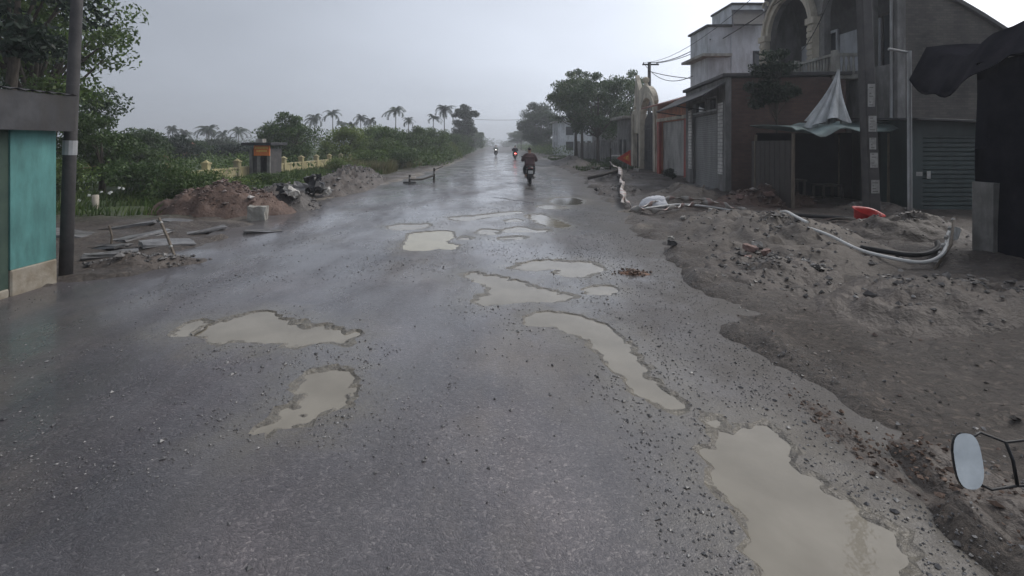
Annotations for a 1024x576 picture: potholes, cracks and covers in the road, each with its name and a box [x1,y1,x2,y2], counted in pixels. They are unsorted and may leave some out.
pothole [400,230,461,251]
pothole [520,310,692,416]
pothole [167,318,215,337]
pothole [580,284,620,295]
pothole [384,223,433,231]
pothole [248,363,362,440]
pothole [505,258,609,278]
pothole [692,410,928,576]
pothole [456,271,581,306]
pothole [524,214,575,228]
pothole [547,197,587,205]
pothole [190,309,365,350]
